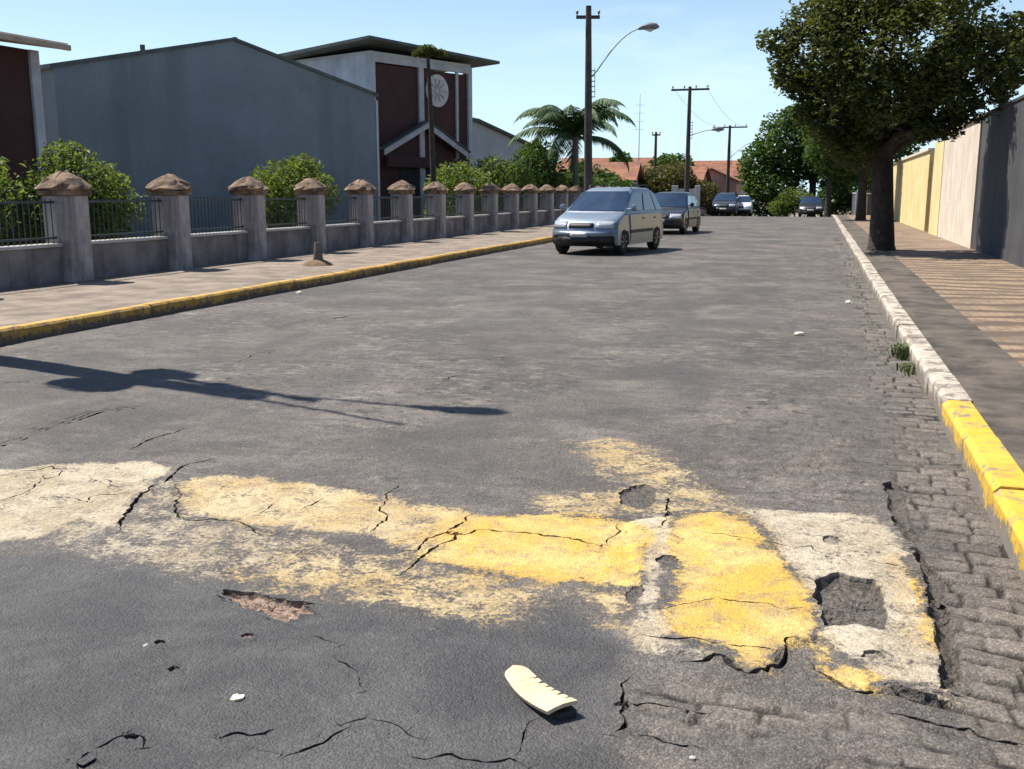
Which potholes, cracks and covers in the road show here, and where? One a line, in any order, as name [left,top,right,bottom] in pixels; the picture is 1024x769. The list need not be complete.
crack [0,403,328,539]
pothole [146,637,174,649]
pothole [159,662,187,677]
crack [304,632,373,694]
pothole [613,483,661,511]
crack [363,480,627,577]
crack [219,713,545,769]
crack [601,478,1024,755]
pothole [805,570,895,634]
pothole [217,588,323,626]
pothole [649,553,685,570]
pothole [618,581,652,607]
